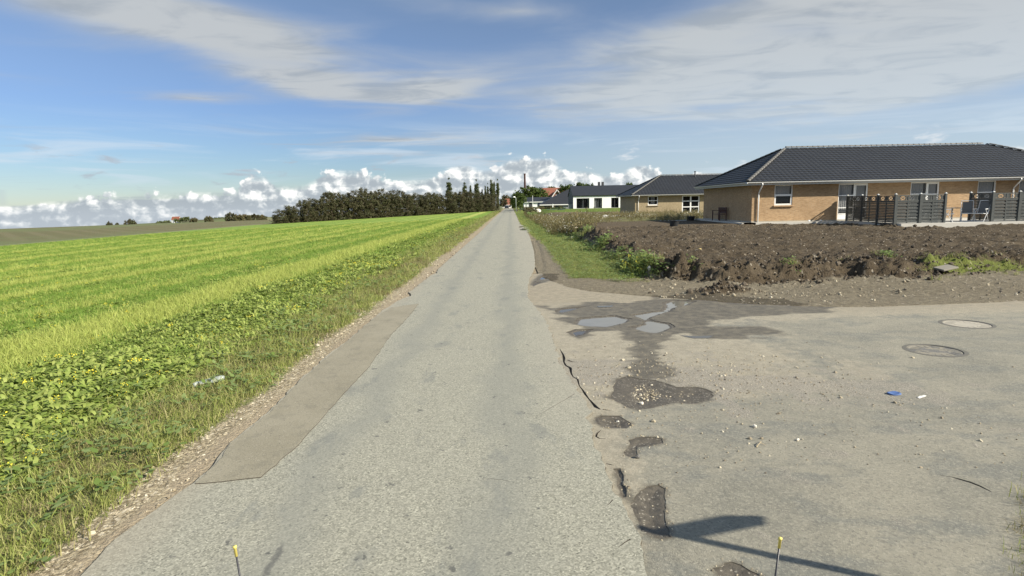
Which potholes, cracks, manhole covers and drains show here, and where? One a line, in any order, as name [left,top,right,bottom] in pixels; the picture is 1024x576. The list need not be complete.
pothole [624,437,663,458]
pothole [630,485,670,539]
manhole cover [938,319,997,329]
manhole cover [902,344,969,357]
pothole [713,562,759,576]
crack [540,350,600,414]
pothole [609,376,713,410]
pothole [614,468,627,498]
pothole [596,416,631,428]
